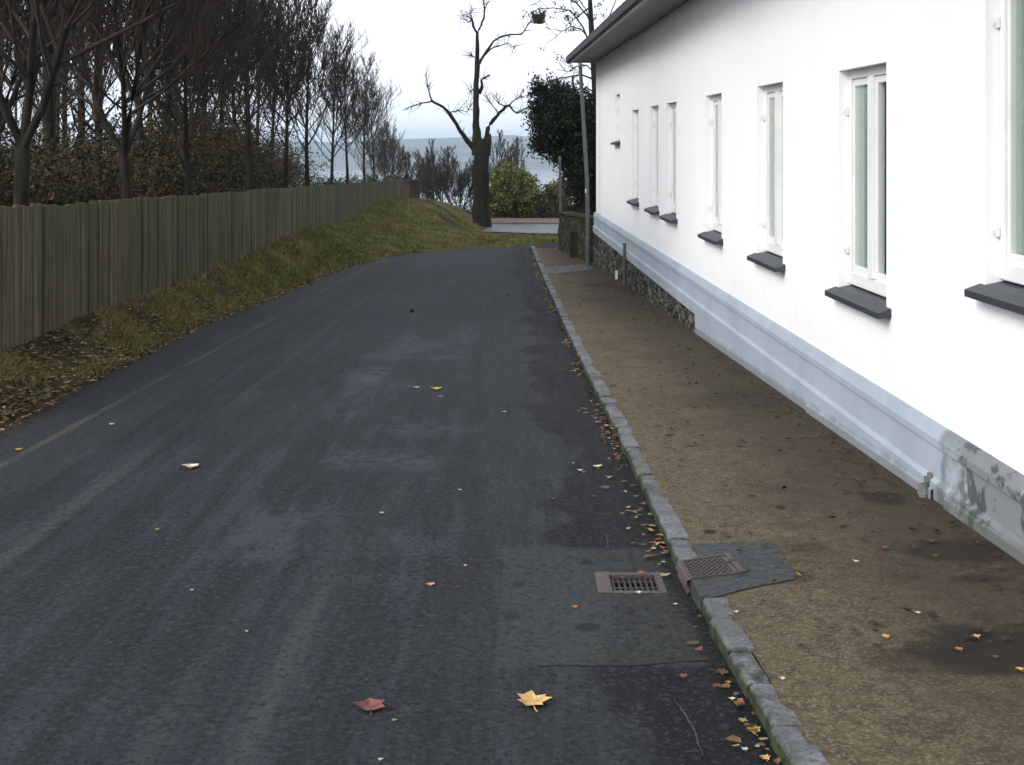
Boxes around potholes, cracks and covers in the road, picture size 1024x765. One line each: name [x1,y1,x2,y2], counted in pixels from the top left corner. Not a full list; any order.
drain grate [593,572,667,594]
crack [674,699,703,756]
